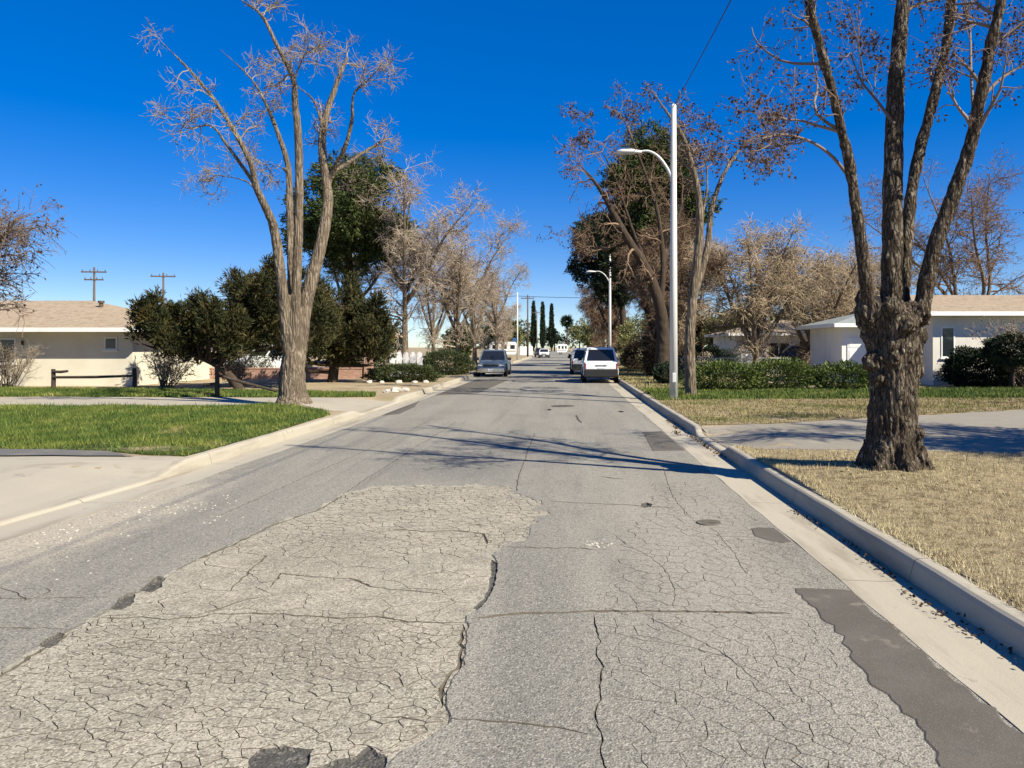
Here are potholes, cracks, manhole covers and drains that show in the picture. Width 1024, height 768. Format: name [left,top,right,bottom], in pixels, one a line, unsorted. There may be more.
pothole [141,576,166,592]
pothole [321,745,388,768]
crack [0,433,911,768]
pothole [111,592,135,610]
pothole [248,746,314,768]
pothole [39,633,65,648]
